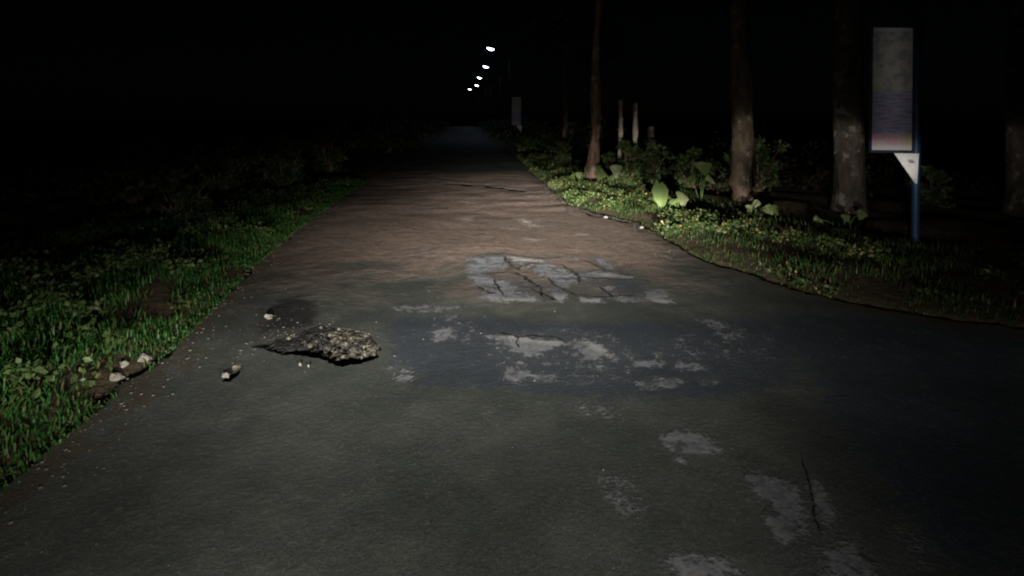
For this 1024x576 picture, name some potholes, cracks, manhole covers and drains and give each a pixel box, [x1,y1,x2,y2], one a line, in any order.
pothole [251,325,382,367]
crack [476,253,654,301]
crack [407,184,533,211]
crack [497,330,565,347]
crack [801,457,822,535]
